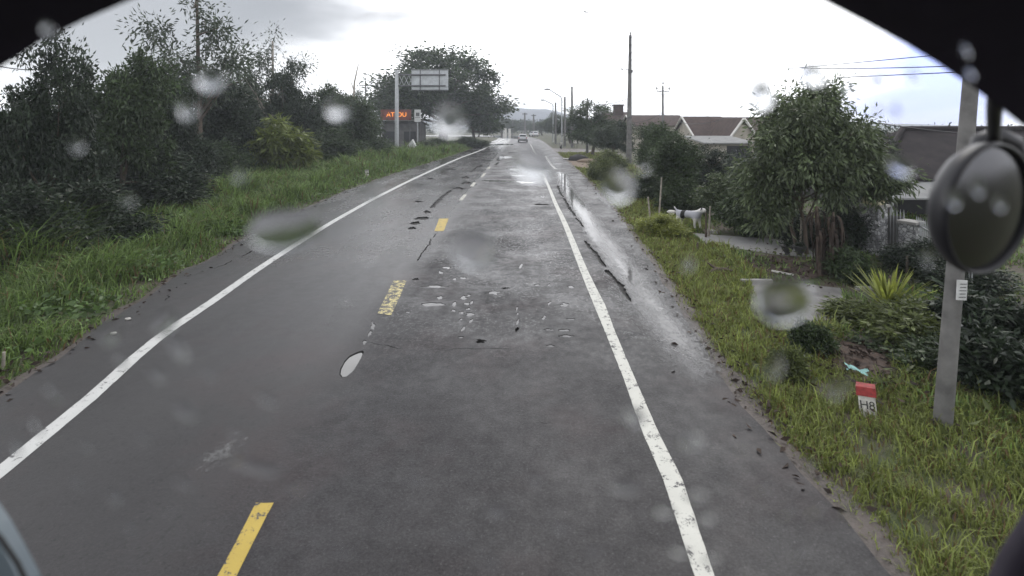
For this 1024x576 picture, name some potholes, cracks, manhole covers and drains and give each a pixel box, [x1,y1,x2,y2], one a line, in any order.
pothole [339,351,364,377]
